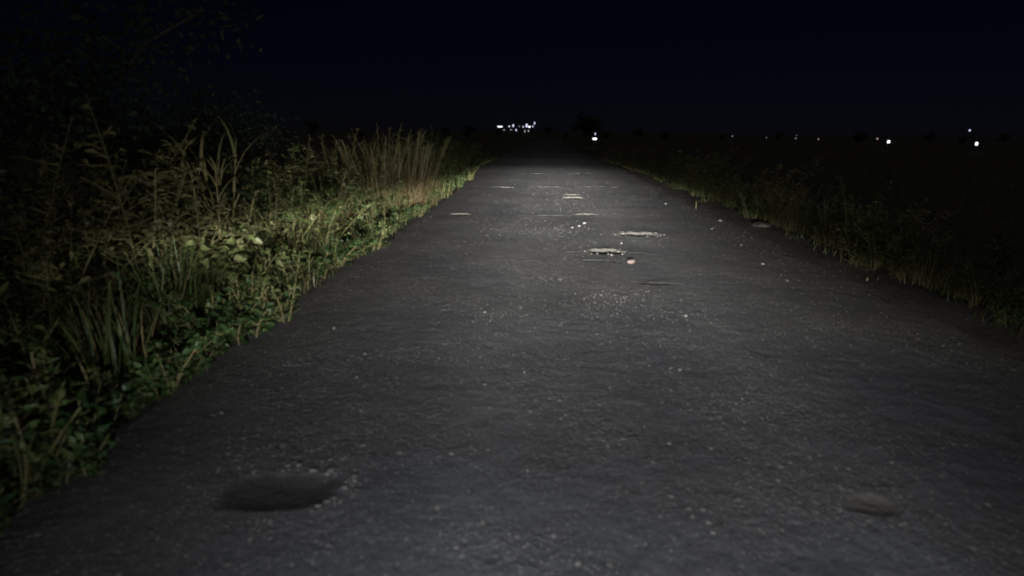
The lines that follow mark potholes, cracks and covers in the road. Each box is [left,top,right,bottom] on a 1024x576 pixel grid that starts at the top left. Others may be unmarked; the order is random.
pothole [206,472,345,513]
pothole [840,491,905,518]
